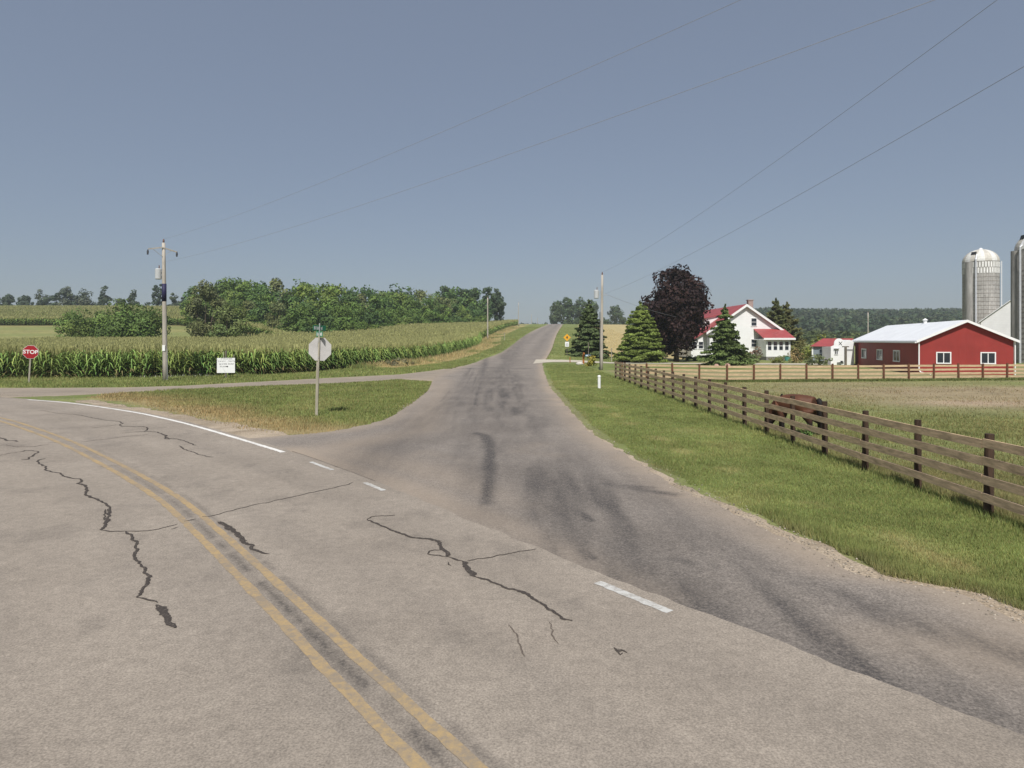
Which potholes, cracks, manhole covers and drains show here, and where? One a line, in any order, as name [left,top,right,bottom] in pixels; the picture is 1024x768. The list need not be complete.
crack [1,438,177,628]
crack [187,482,353,554]
crack [43,410,210,457]
crack [367,515,572,656]
